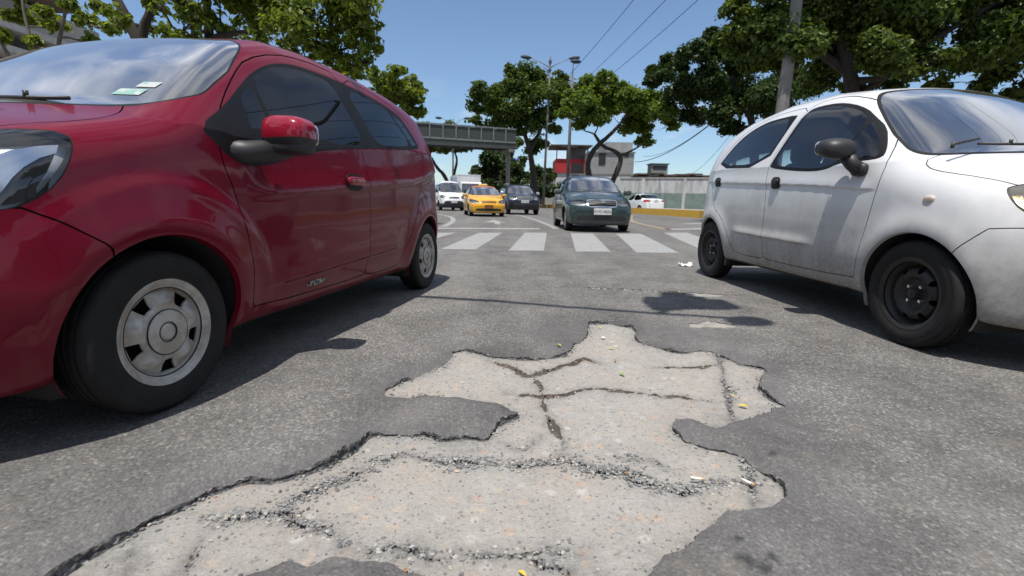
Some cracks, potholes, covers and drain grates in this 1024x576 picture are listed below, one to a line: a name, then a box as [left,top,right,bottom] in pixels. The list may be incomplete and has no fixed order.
crack [495,357,712,451]
pothole [44,320,788,576]
